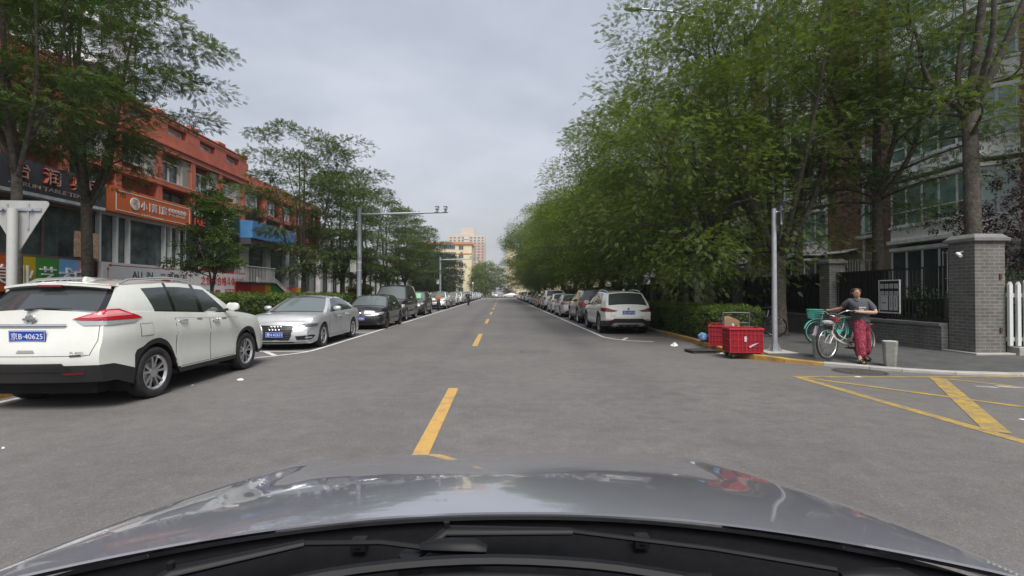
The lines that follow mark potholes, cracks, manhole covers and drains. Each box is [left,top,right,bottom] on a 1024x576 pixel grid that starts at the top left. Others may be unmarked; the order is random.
manhole cover [831,368,890,376]
